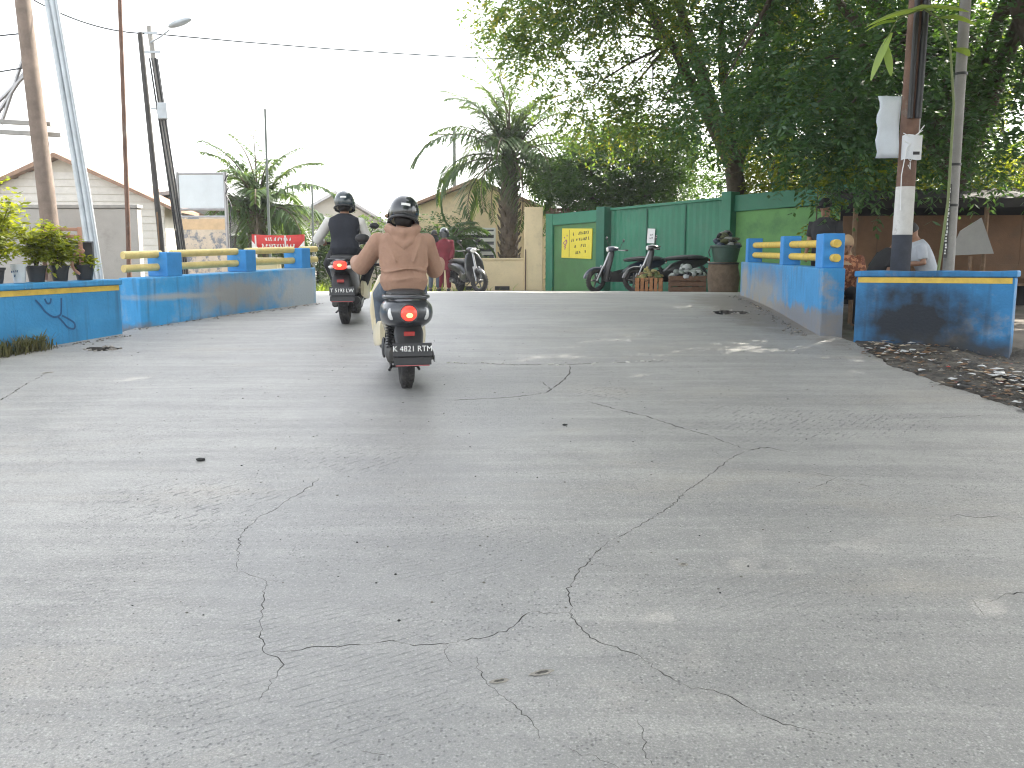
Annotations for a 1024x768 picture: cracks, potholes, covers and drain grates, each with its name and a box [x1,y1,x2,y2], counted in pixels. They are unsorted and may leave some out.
crack [229,479,319,697]
crack [447,359,671,400]
crack [275,450,827,736]
crack [593,403,782,451]
